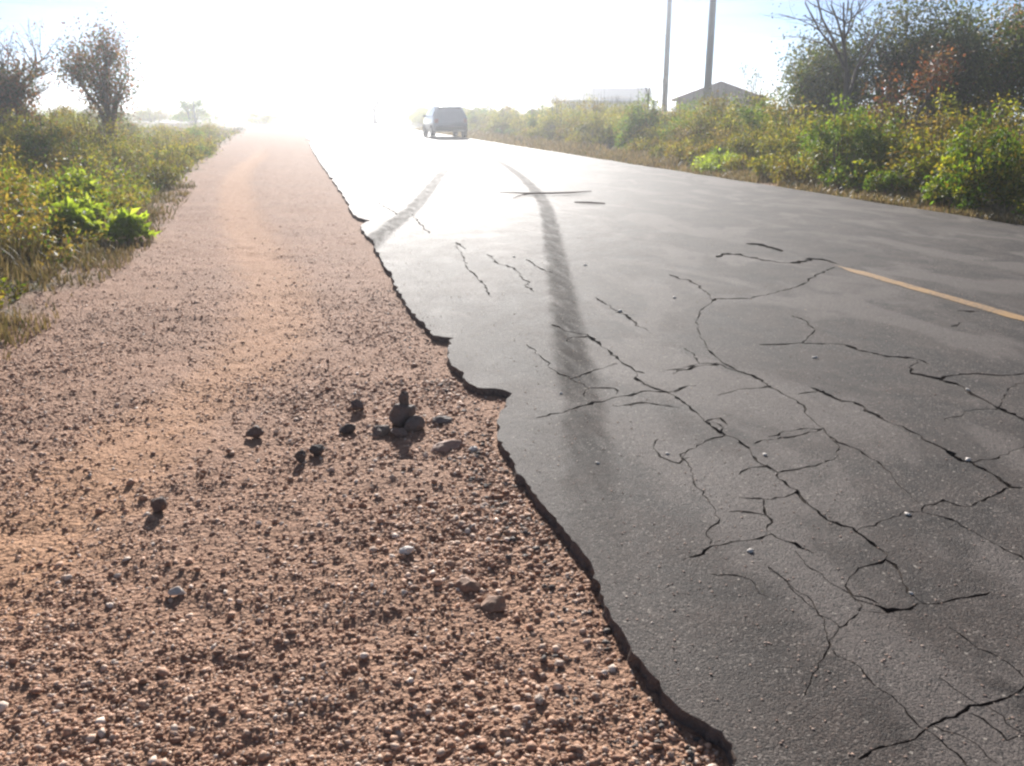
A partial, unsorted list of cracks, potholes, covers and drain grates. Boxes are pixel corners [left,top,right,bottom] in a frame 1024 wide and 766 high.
crack [454,242,552,297]
crack [716,243,837,264]
crack [527,267,1024,766]
